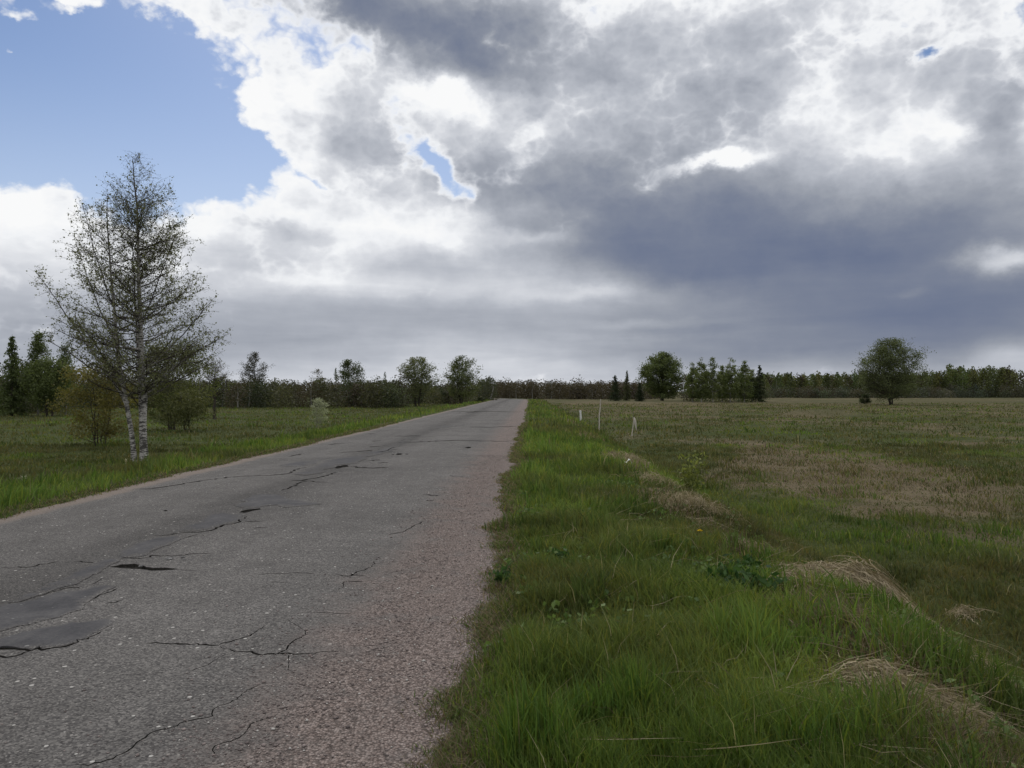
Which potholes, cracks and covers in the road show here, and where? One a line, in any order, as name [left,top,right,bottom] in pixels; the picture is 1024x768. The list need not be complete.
crack [339,561,375,589]
crack [146,622,342,672]
crack [42,561,121,603]
crack [128,516,268,571]
crack [78,685,259,766]
crack [212,716,273,757]
